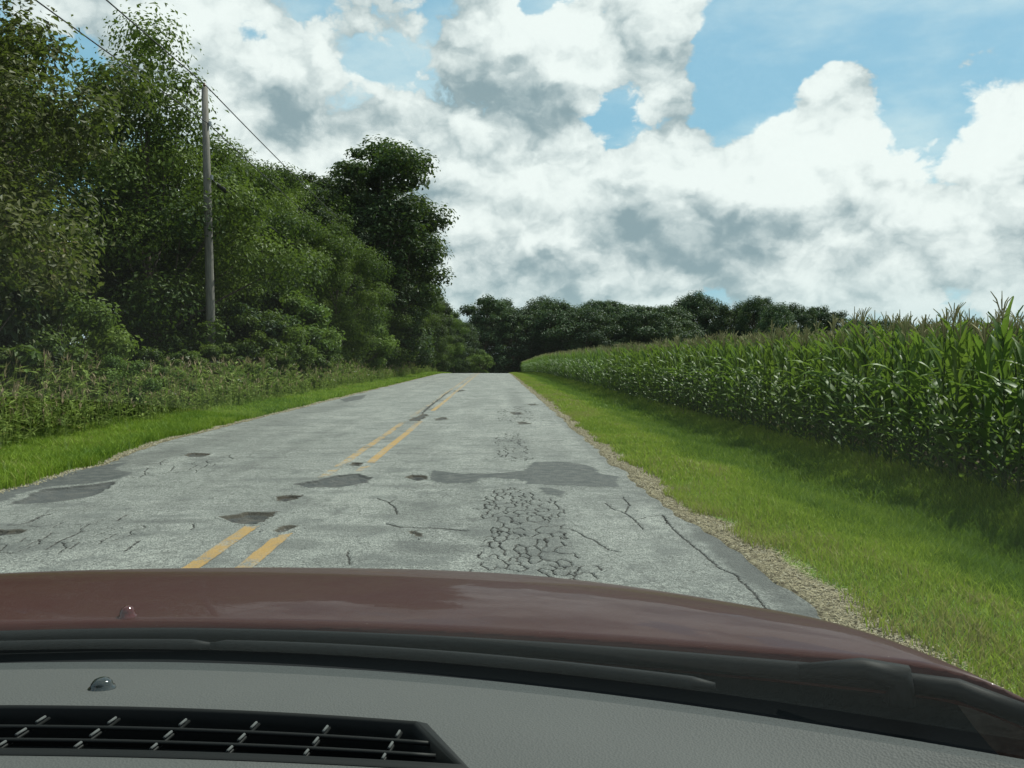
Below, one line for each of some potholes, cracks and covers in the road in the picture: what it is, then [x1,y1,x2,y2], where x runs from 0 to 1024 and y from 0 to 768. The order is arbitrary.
pothole [259,524,305,536]
pothole [214,511,285,526]
pothole [0,528,34,537]
crack [377,498,466,531]
pothole [270,494,308,503]
crack [492,392,549,461]
crack [0,513,146,554]
pothole [289,473,377,489]
crack [470,488,617,580]
crack [604,497,767,609]
